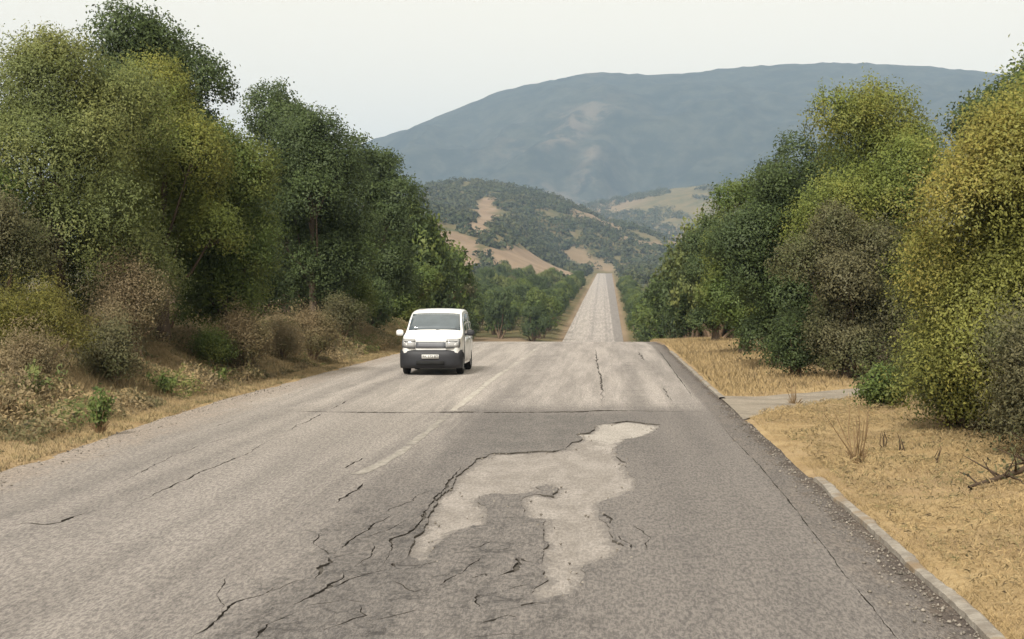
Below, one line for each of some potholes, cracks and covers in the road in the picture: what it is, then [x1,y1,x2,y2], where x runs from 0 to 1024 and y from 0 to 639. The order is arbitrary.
crack [338,458,363,502]
crack [17,511,106,525]
crack [595,350,604,406]
crack [193,468,549,639]
crack [114,420,259,506]
crack [600,512,651,550]
